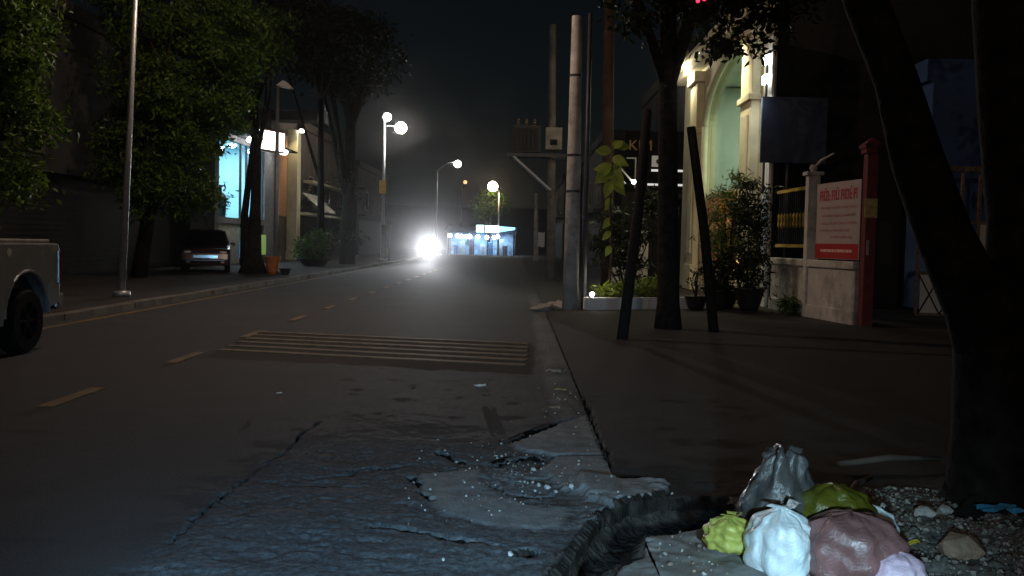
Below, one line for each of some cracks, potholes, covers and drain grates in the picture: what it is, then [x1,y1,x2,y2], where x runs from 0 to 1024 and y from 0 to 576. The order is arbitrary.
pothole [514,548,545,558]
